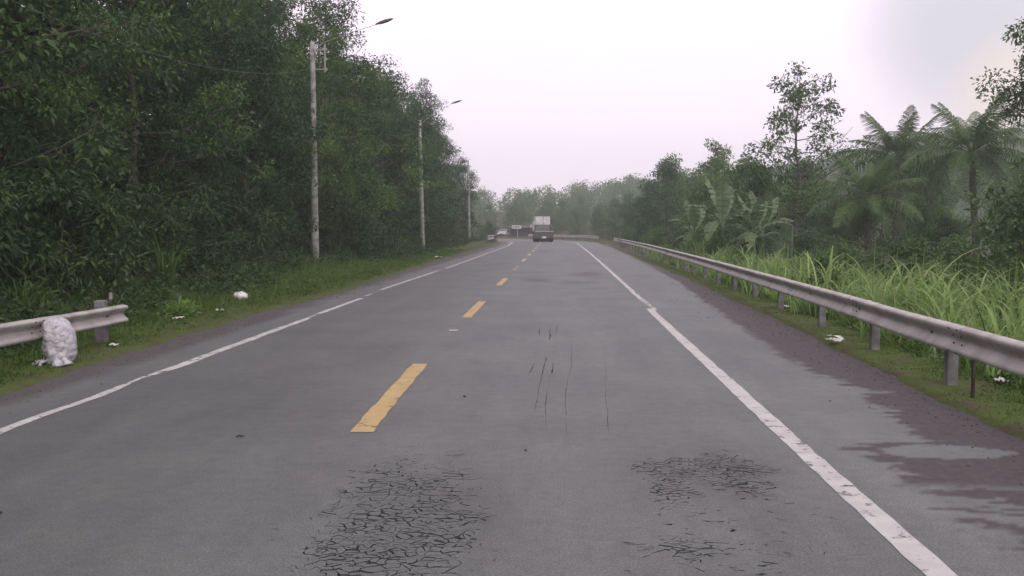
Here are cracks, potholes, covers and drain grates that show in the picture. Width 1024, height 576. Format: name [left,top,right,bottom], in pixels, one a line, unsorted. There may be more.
crack [529,326,572,424]
crack [291,462,495,576]
